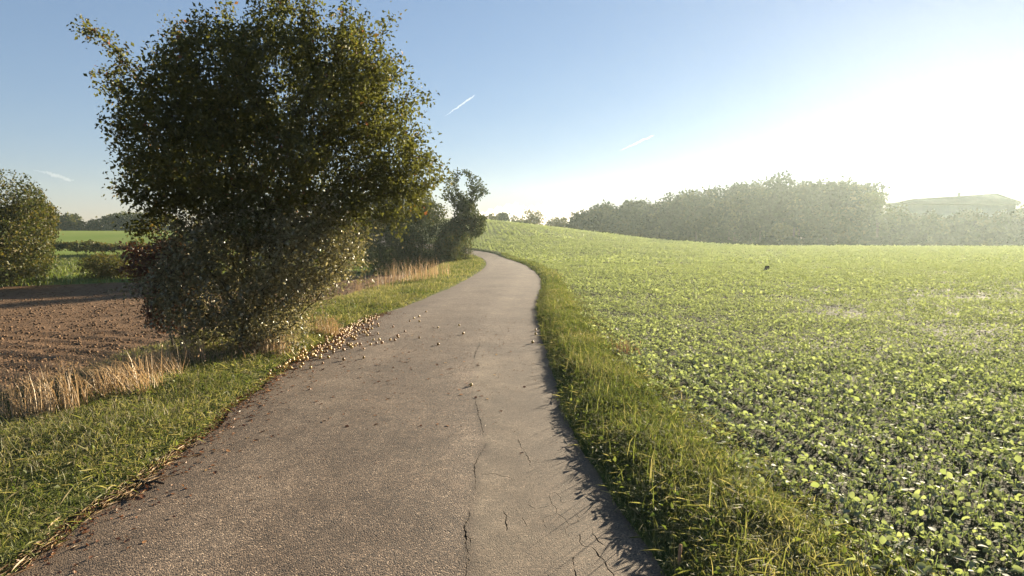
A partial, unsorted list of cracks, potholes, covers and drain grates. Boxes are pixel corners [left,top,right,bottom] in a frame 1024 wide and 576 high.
crack [503,495,614,576]
